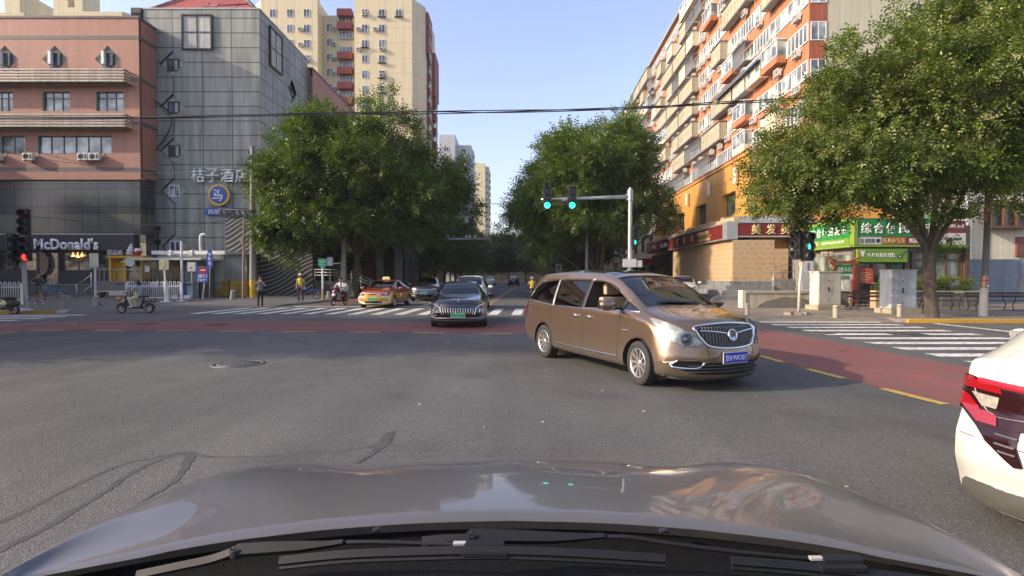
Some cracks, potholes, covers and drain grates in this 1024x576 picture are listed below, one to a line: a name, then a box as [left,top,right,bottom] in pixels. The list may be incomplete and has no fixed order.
manhole cover [210,360,266,368]
